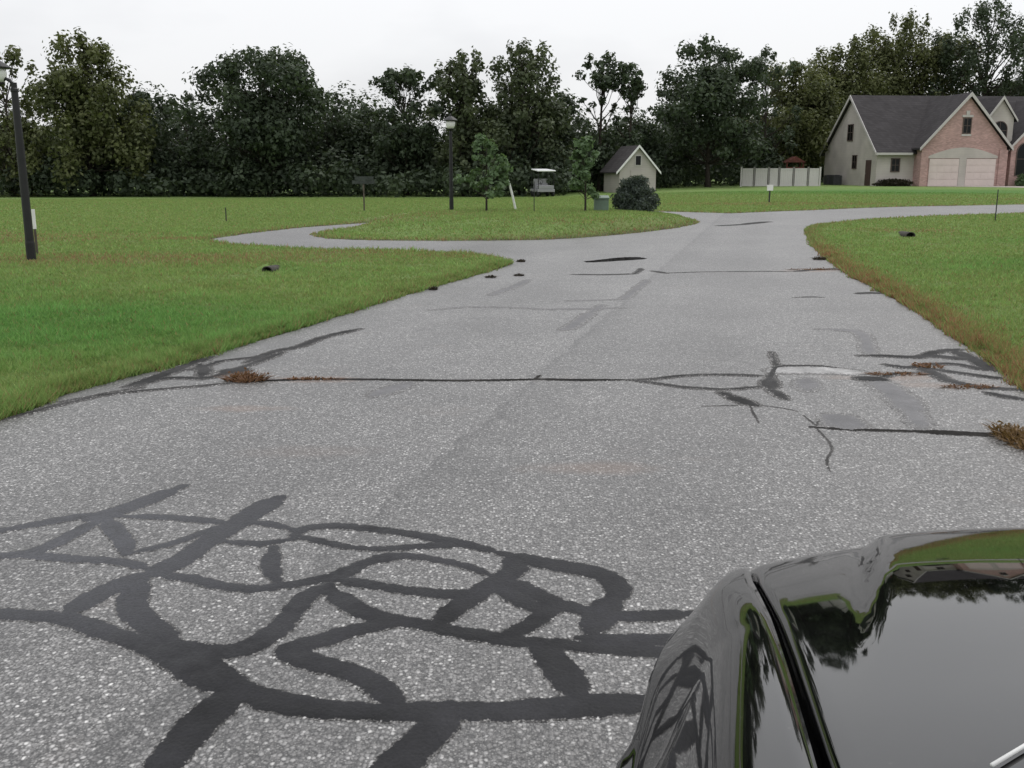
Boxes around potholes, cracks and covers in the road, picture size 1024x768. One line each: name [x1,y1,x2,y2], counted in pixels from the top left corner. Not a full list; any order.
crack [0,328,1024,472]
